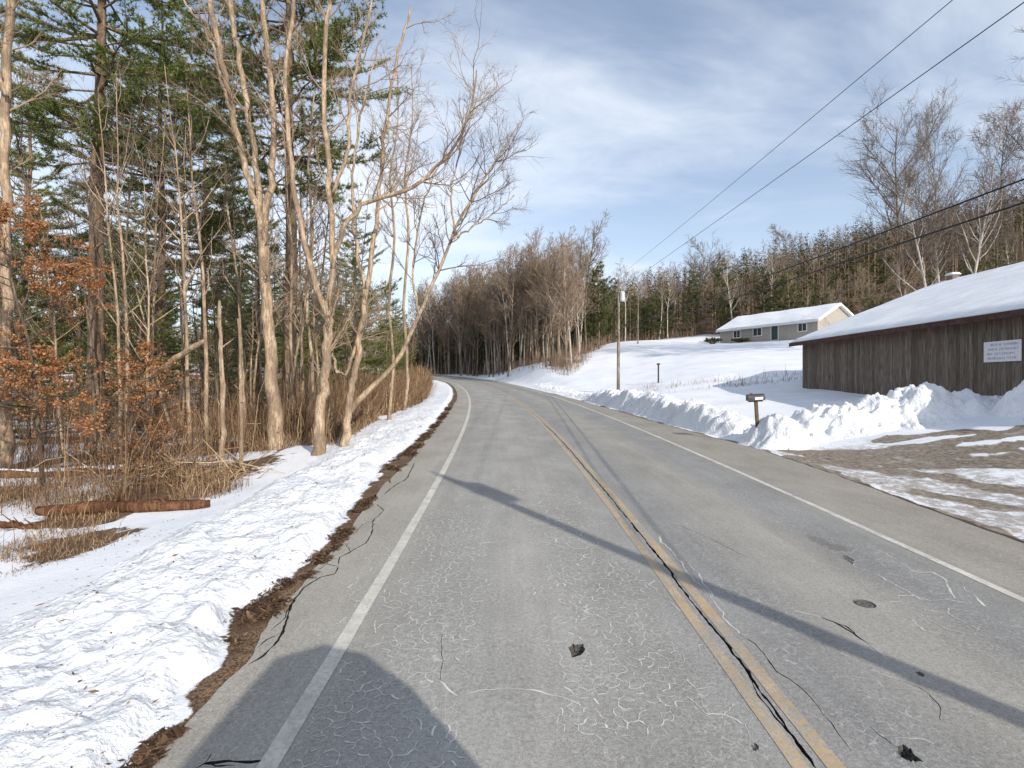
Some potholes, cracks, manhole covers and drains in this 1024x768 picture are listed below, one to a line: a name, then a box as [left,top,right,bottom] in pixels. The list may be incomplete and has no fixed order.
crack [248,426,941,768]
pothole [568,644,585,657]
crack [833,541,1001,655]
manhole cover [852,599,876,608]
crack [196,754,261,768]
pothole [895,744,923,762]
